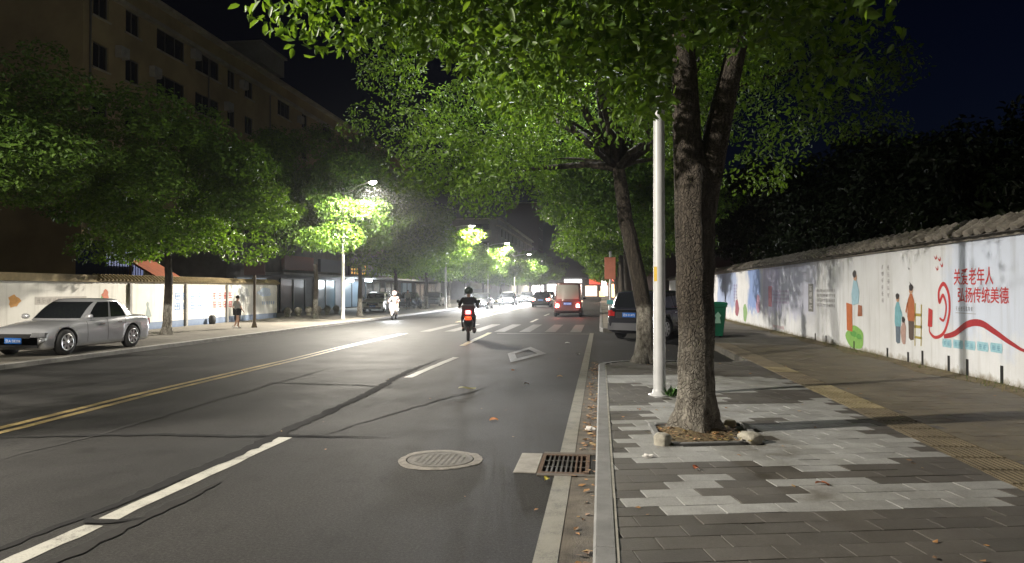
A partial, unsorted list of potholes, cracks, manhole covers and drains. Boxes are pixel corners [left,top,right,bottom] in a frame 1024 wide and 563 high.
drain grate [513,452,596,477]
manhole cover [398,450,483,470]
